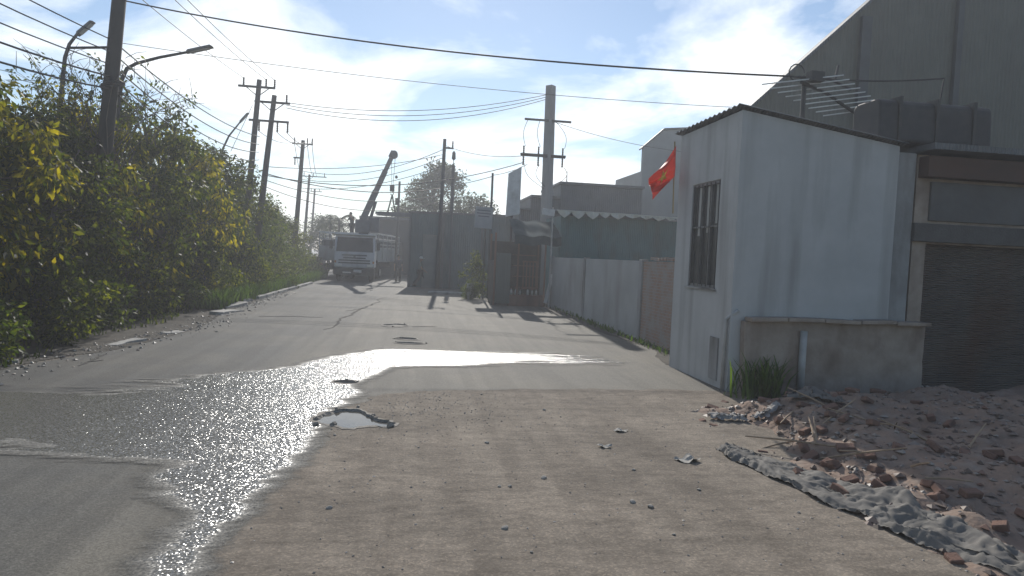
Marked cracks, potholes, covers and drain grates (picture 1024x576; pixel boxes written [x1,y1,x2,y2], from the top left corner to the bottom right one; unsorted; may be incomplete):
pothole [308,405,399,430]
